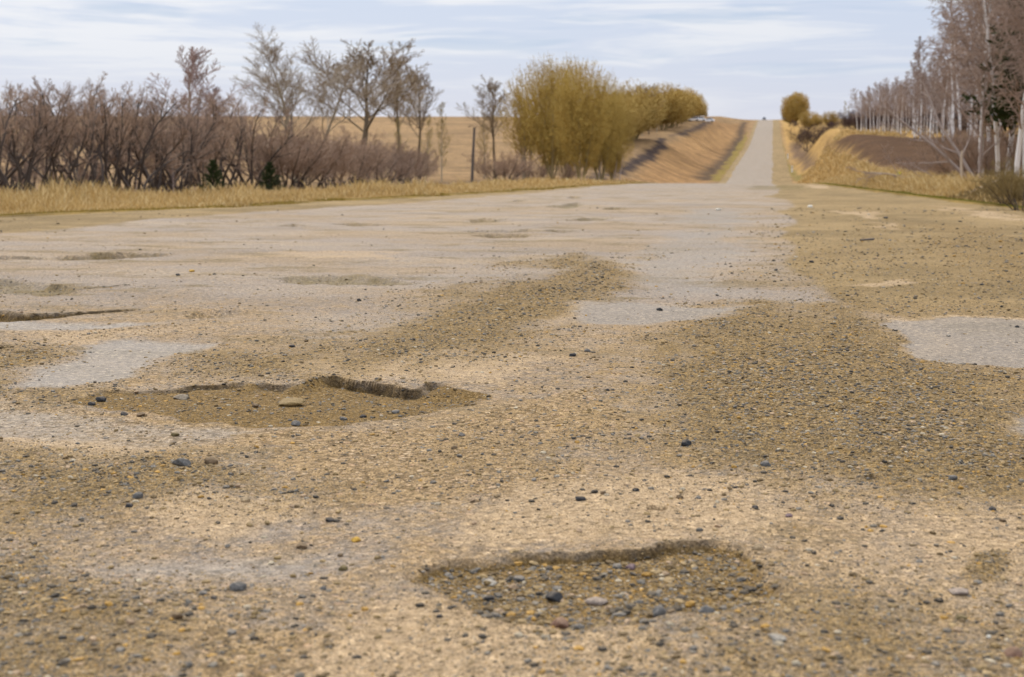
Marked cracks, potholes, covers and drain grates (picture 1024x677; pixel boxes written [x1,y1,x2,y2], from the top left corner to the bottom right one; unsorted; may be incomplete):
pothole [0,309,129,322]
pothole [56,252,167,261]
pothole [263,274,421,286]
pothole [398,539,791,632]
pothole [57,376,501,428]
